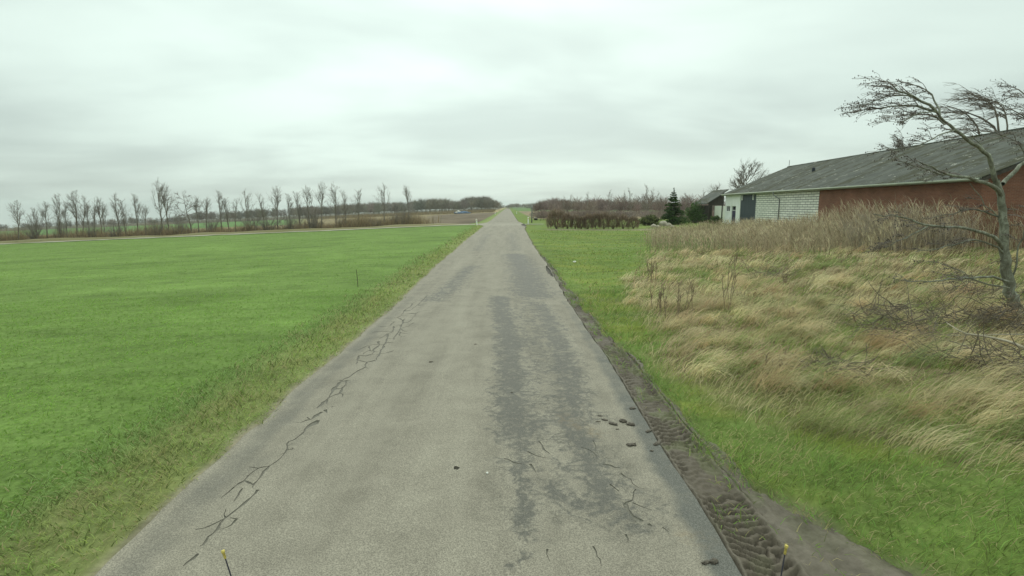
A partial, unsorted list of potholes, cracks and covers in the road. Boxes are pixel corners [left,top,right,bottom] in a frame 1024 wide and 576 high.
crack [581,441,669,542]
crack [183,296,427,566]
crack [504,441,551,472]
